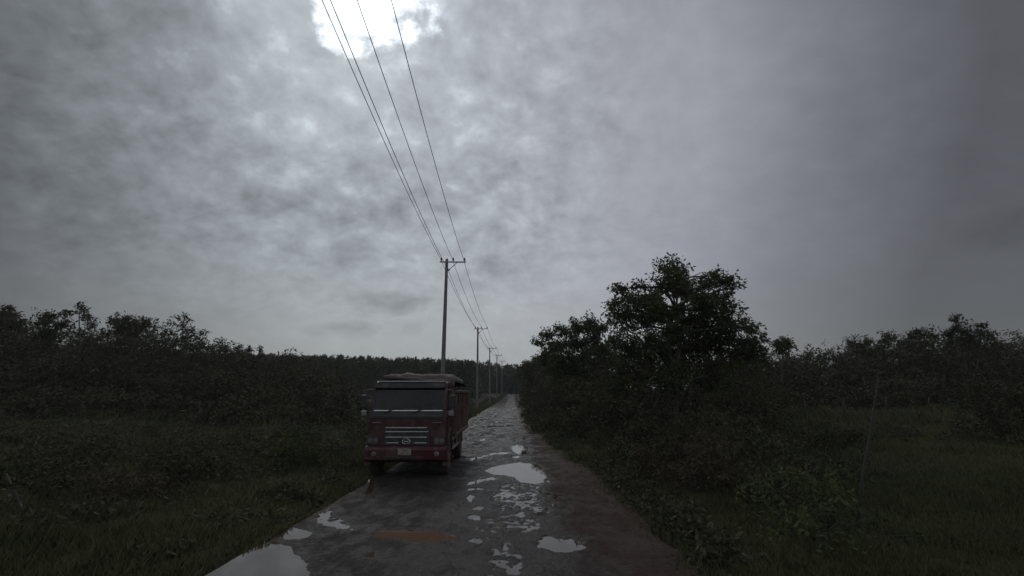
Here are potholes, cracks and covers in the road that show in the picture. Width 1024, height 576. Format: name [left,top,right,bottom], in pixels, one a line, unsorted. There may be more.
pothole [205,539,322,576]
pothole [509,445,530,455]
pothole [307,504,361,530]
pothole [529,533,598,555]
pothole [479,461,551,485]
